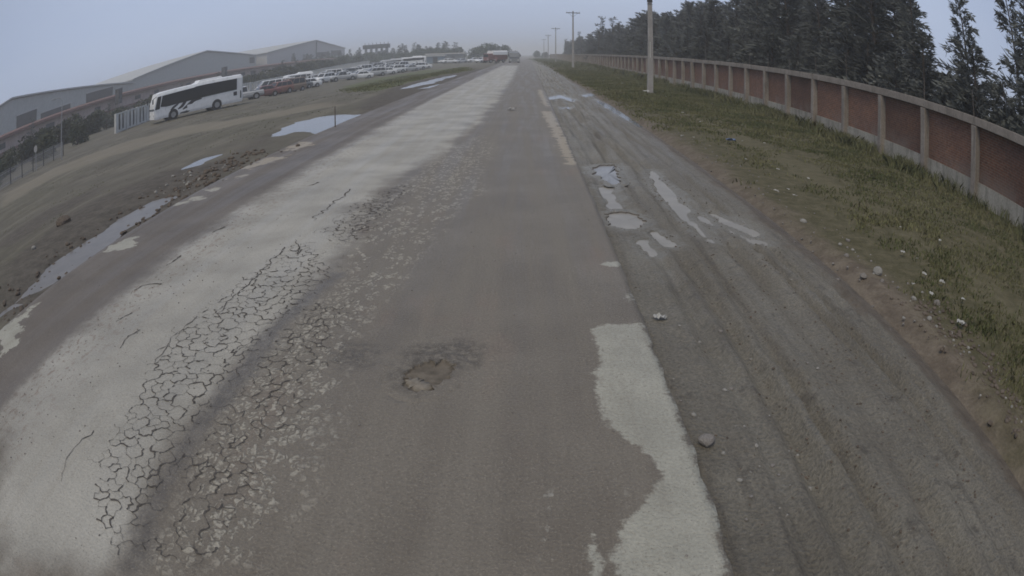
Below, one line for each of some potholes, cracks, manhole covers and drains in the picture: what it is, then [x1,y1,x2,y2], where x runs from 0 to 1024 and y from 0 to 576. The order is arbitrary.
pothole [380,351,477,404]
crack [312,182,412,240]
pothole [586,163,630,187]
pothole [599,209,659,233]
crack [88,240,354,565]
